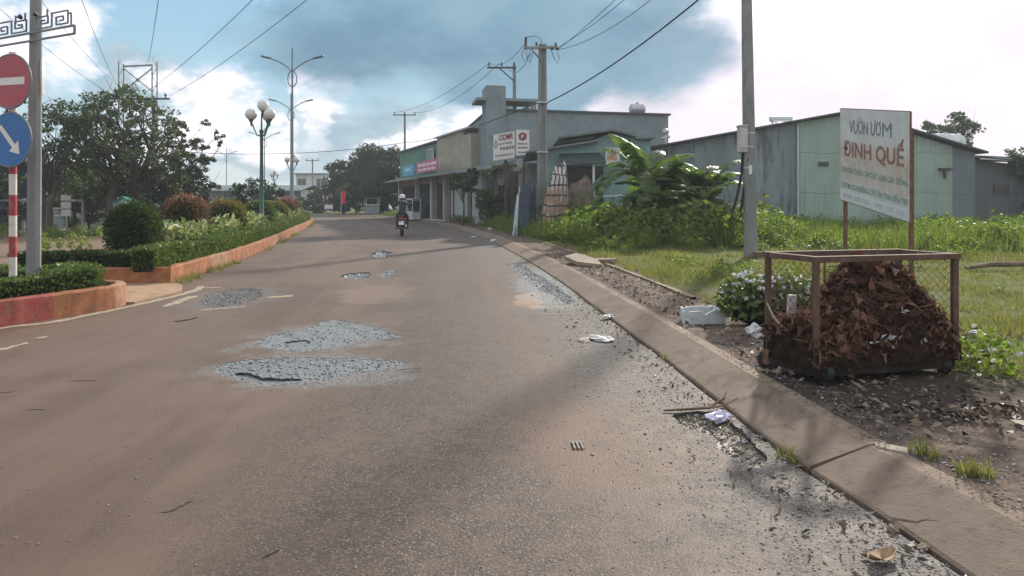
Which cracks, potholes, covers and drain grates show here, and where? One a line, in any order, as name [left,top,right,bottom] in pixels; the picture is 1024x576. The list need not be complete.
pothole [507,264,573,304]
pothole [672,411,767,468]
pothole [370,250,391,259]
crack [160,501,192,513]
pothole [210,357,405,386]
pothole [255,320,402,353]
pothole [199,288,264,308]
